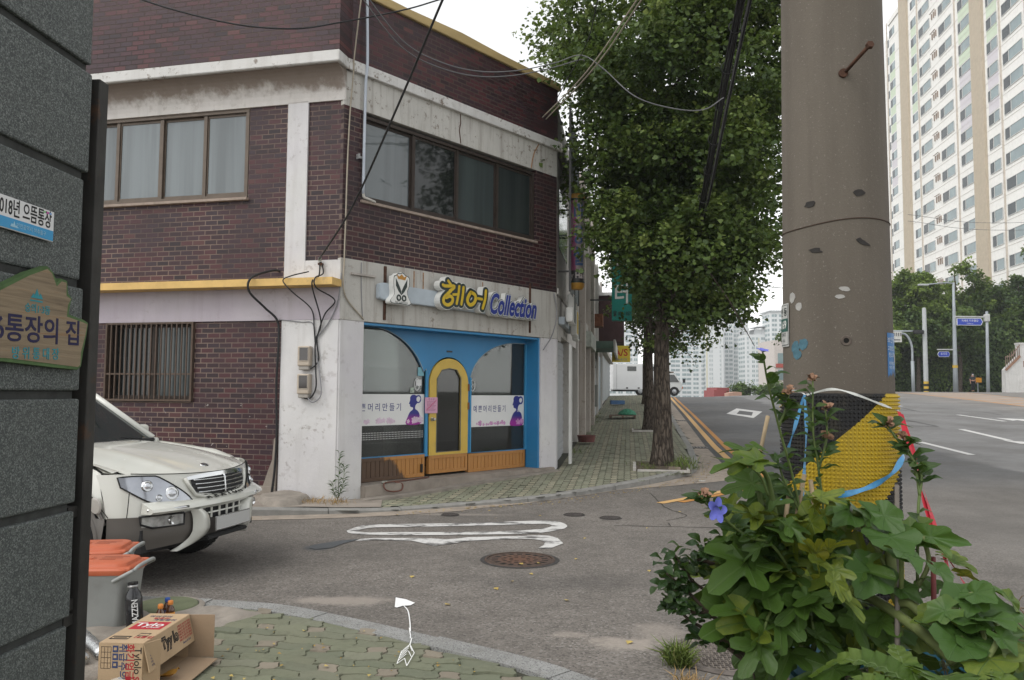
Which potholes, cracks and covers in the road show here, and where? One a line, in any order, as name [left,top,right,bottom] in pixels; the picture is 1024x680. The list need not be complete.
manhole cover [480,552,560,568]
